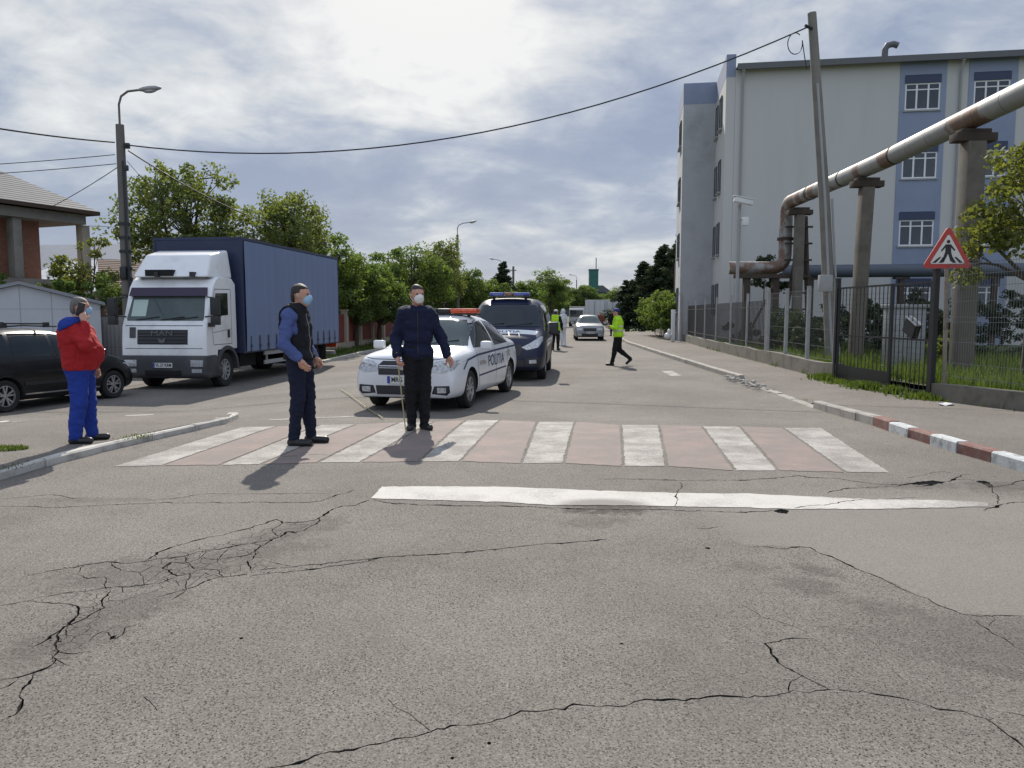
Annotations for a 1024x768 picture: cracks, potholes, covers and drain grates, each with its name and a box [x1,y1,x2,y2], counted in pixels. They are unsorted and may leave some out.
crack [0,490,368,722]
crack [254,539,605,576]
crack [270,607,1024,768]
crack [749,546,1023,650]
